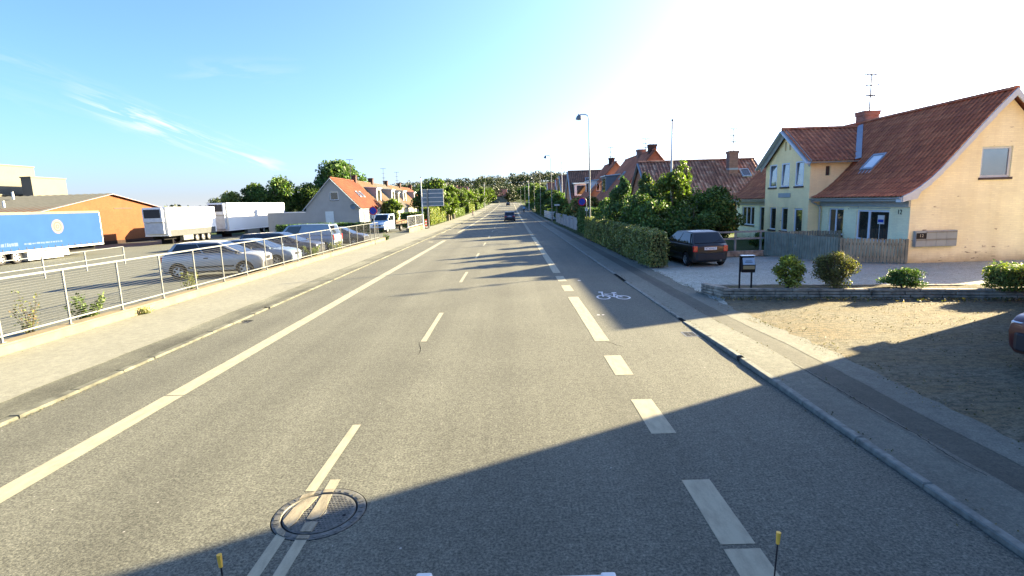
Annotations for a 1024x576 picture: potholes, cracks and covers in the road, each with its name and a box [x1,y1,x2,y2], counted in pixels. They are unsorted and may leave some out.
manhole cover [270,488,367,541]
